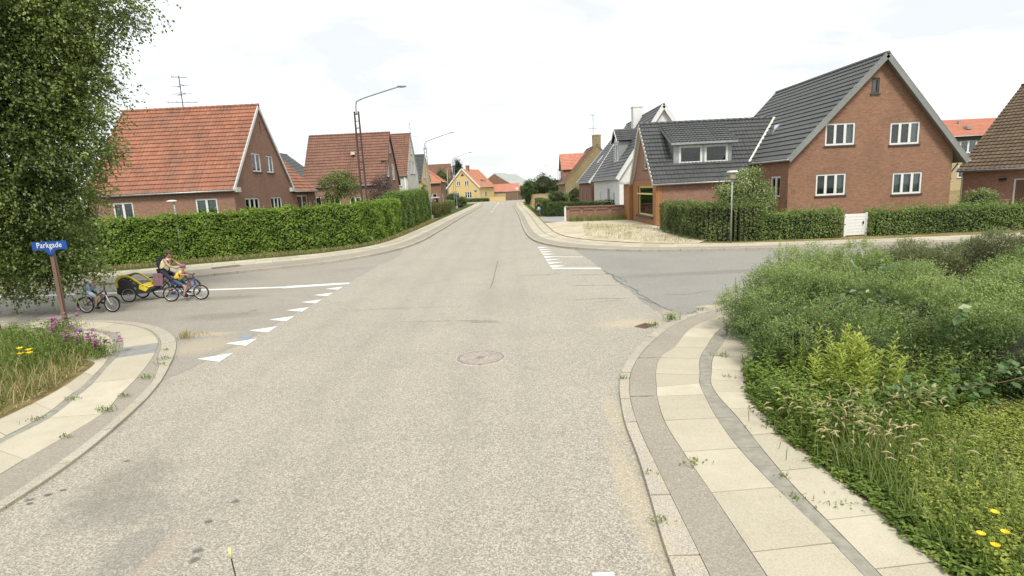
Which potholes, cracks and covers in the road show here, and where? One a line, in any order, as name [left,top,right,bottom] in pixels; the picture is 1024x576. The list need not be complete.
manhole cover [455,350,507,366]
